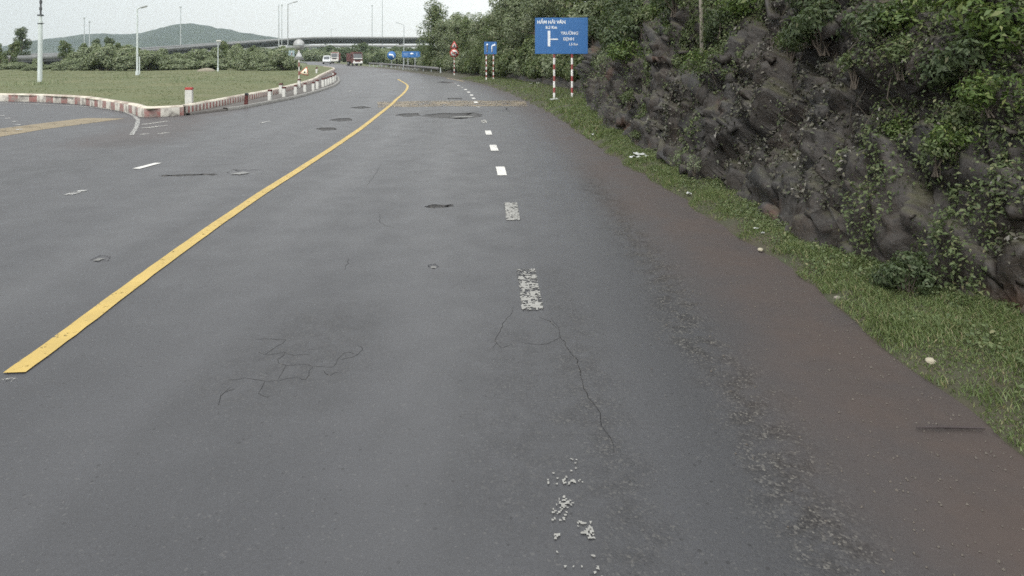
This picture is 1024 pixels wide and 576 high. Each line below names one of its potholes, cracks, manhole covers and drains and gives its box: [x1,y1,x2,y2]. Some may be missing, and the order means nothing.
crack [236,339,363,398]
crack [521,317,614,445]
